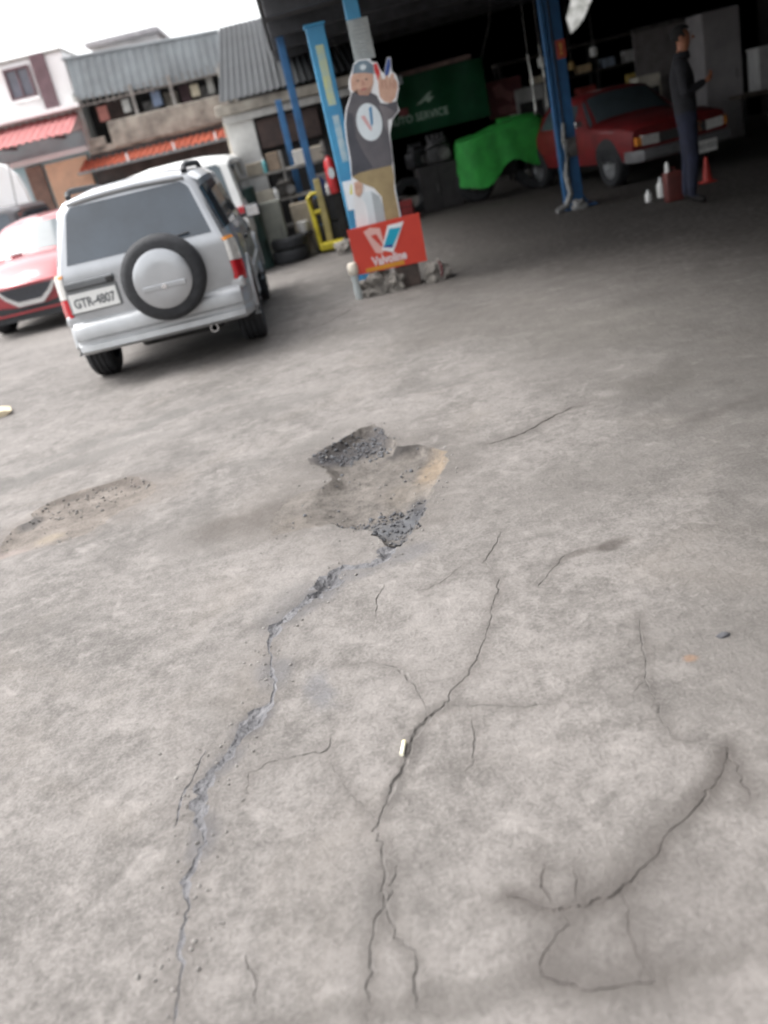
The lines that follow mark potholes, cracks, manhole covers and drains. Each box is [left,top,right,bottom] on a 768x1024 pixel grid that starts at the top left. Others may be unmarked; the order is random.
pothole [0,476,156,560]
pothole [268,424,450,548]
crack [507,618,751,993]
crack [538,550,579,586]
crack [490,404,584,444]
crack [173,531,550,1024]
